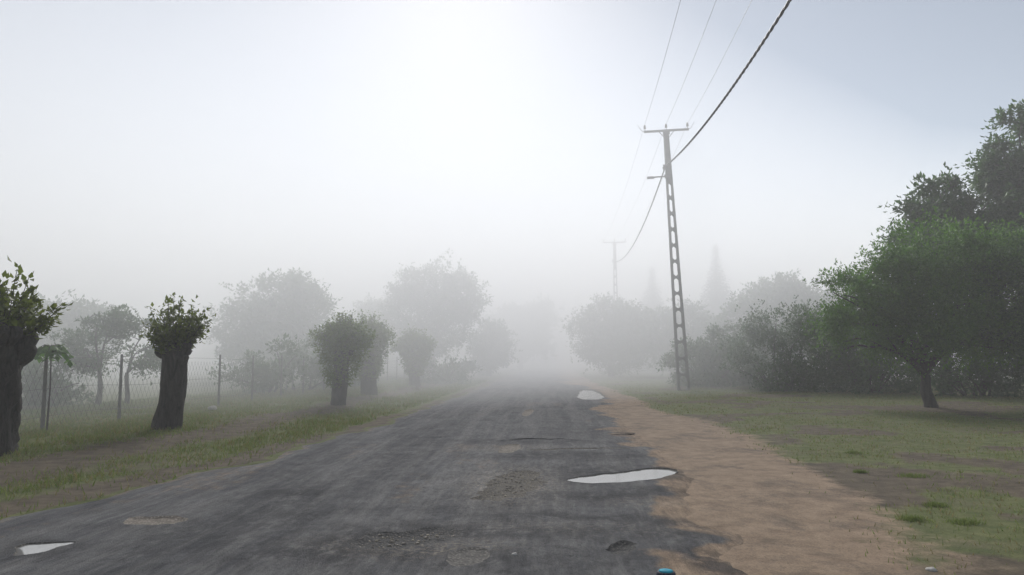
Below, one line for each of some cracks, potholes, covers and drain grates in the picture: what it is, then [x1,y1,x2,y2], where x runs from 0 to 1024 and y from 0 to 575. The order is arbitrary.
crack [498,433,636,450]
pothole [567,467,678,480]
pothole [605,540,637,555]
